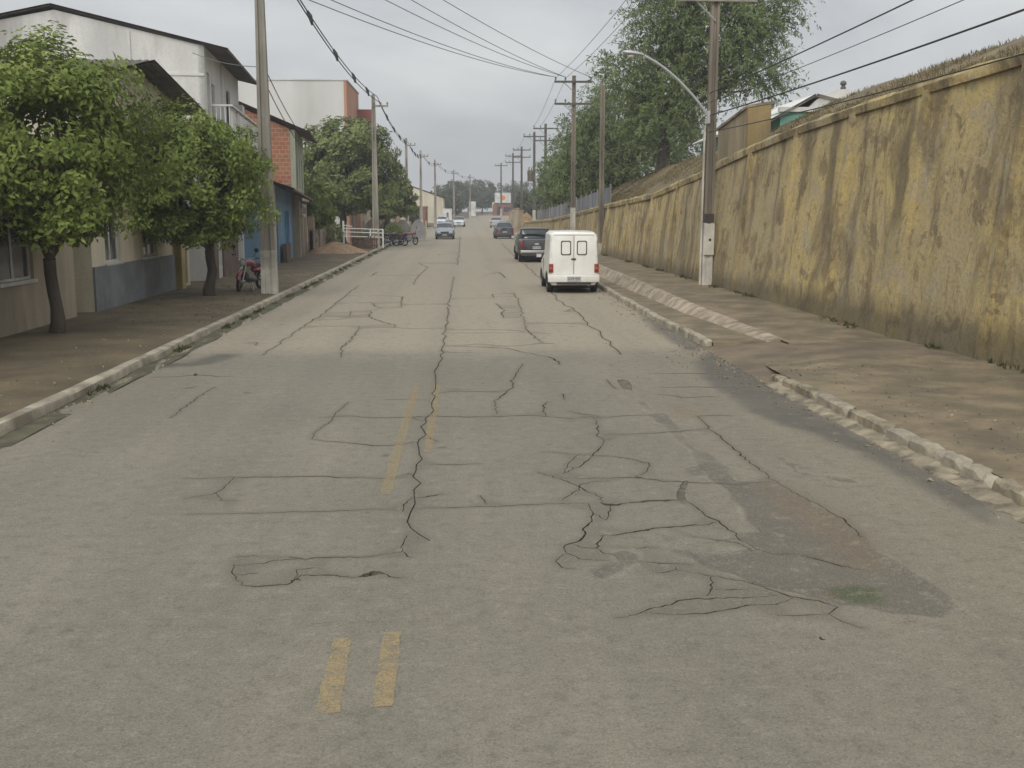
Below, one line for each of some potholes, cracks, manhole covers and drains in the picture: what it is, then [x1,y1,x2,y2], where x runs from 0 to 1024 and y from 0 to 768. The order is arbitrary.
crack [186,272,865,629]
pothole [617,379,632,390]
